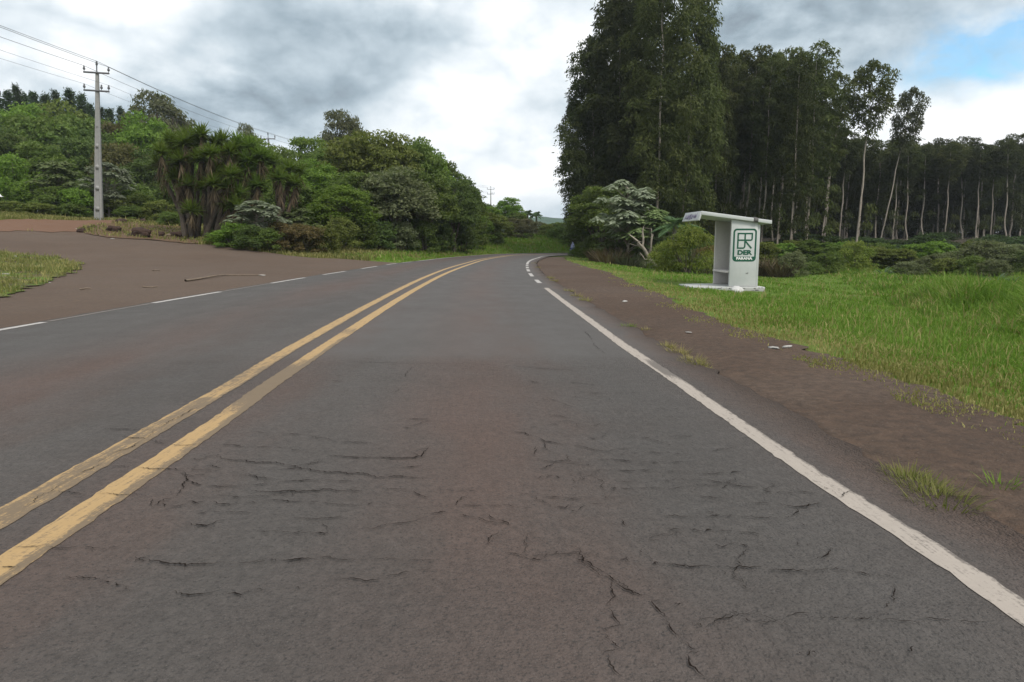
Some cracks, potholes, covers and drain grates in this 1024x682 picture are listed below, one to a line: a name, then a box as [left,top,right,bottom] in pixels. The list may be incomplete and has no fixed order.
crack [695,585,979,627]
crack [27,381,877,675]
